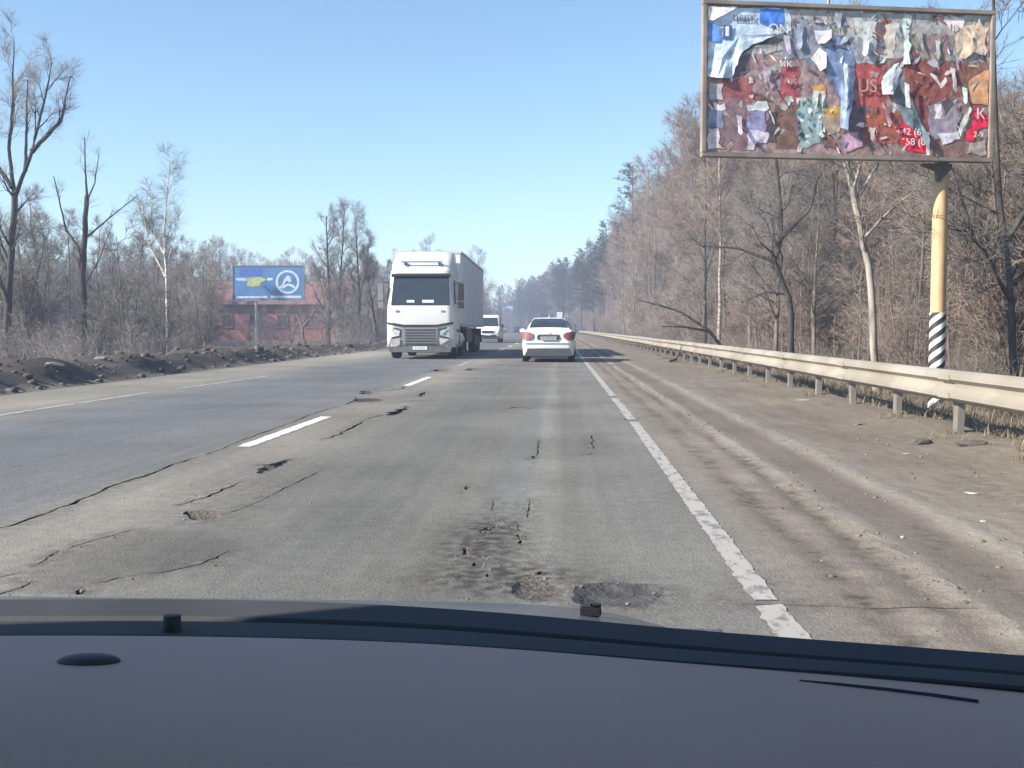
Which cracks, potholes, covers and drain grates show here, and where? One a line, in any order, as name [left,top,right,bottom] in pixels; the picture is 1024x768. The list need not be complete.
pothole [183,511,221,521]
crack [471,499,531,567]
pothole [571,582,664,608]
crack [151,551,228,574]
crack [39,529,135,564]
crack [174,471,319,515]
pothole [511,576,569,602]
pothole [256,459,294,474]
